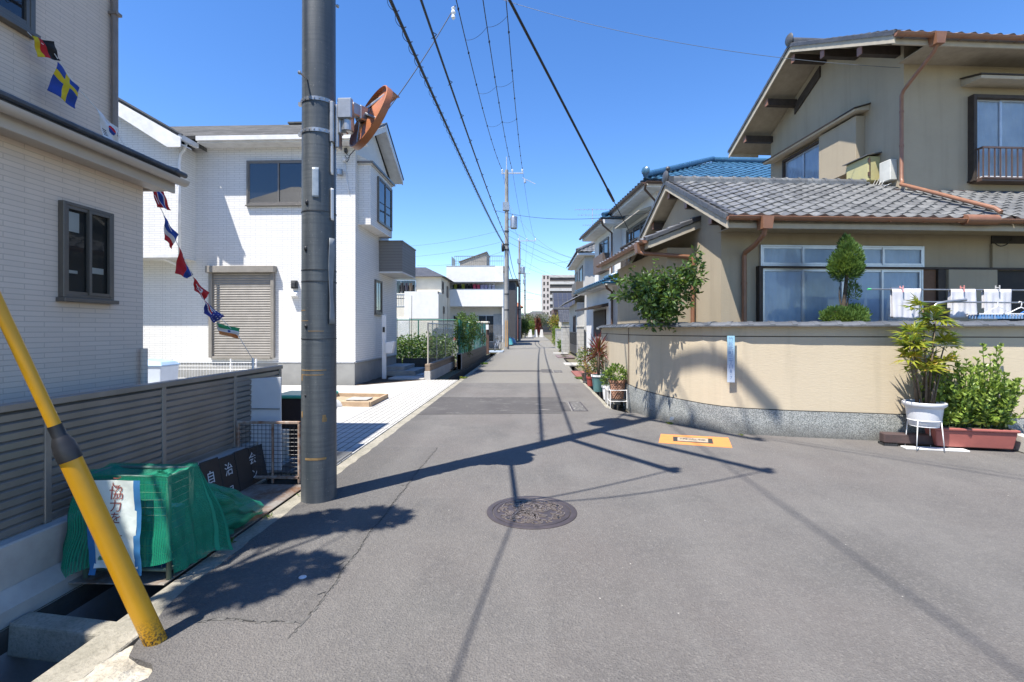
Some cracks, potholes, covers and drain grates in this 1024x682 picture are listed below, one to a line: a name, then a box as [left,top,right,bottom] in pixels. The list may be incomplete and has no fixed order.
crack [197,448,437,638]
utility cover [568,402,588,411]
manhole cover [487,496,577,530]
